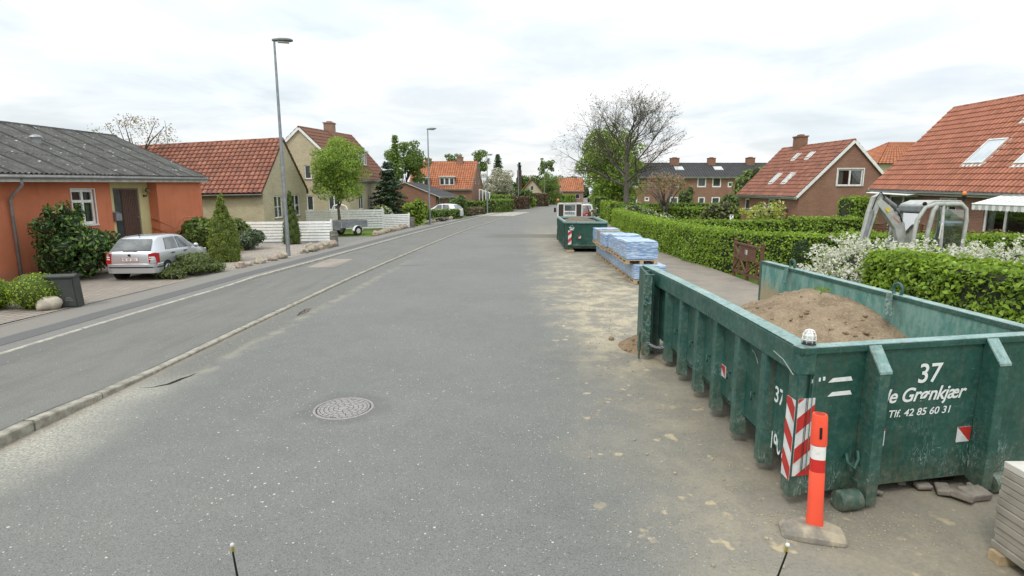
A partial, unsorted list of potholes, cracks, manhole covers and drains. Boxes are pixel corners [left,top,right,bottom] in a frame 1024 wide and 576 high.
manhole cover [313,397,374,420]
crack [143,373,196,388]
